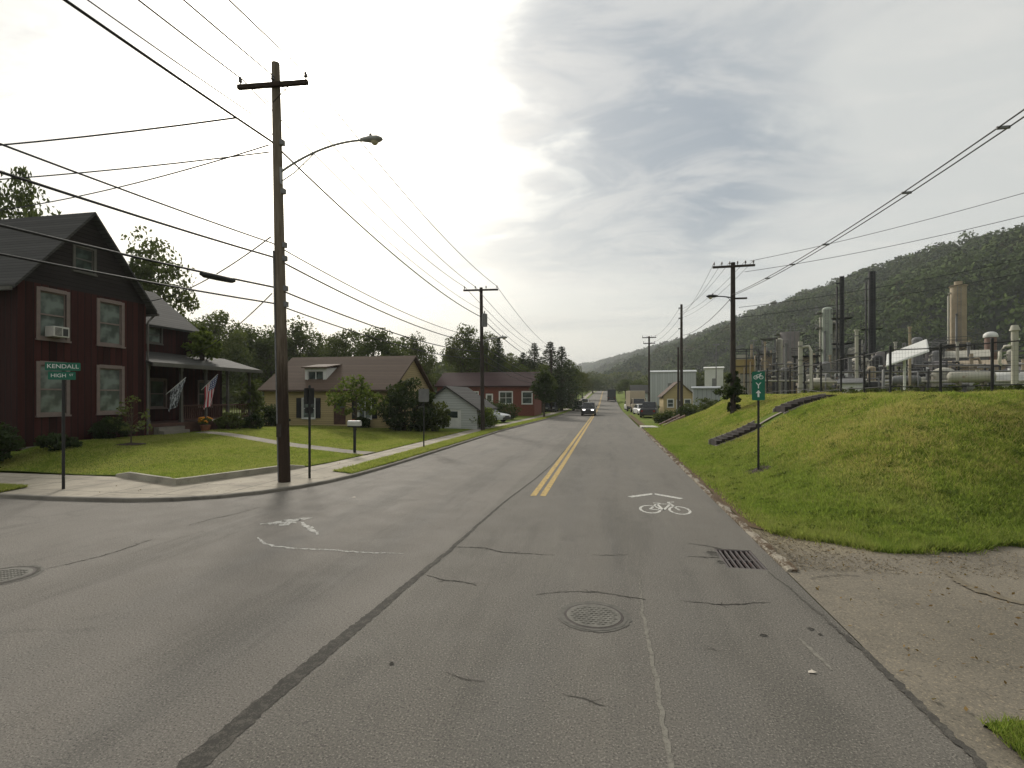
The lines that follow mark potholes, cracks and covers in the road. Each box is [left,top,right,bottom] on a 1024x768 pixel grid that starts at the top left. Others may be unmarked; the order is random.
crack [541,589,646,600]
drain grate [715,549,768,570]
manhole cover [557,601,632,633]
manhole cover [0,565,45,585]
crack [680,600,766,608]
